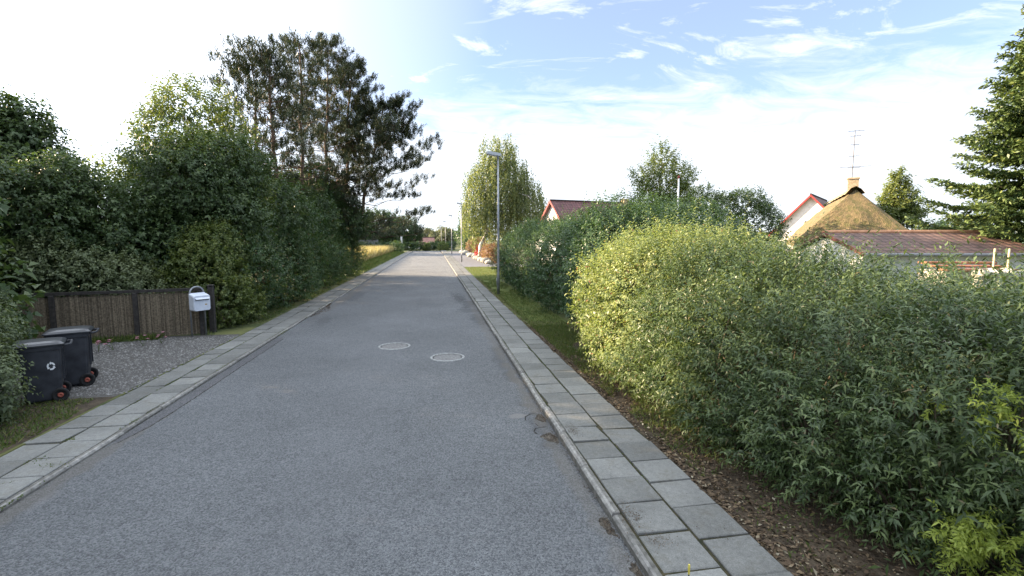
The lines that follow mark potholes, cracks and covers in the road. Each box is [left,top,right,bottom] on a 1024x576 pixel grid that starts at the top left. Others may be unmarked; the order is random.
manhole cover [430,353,465,361]
